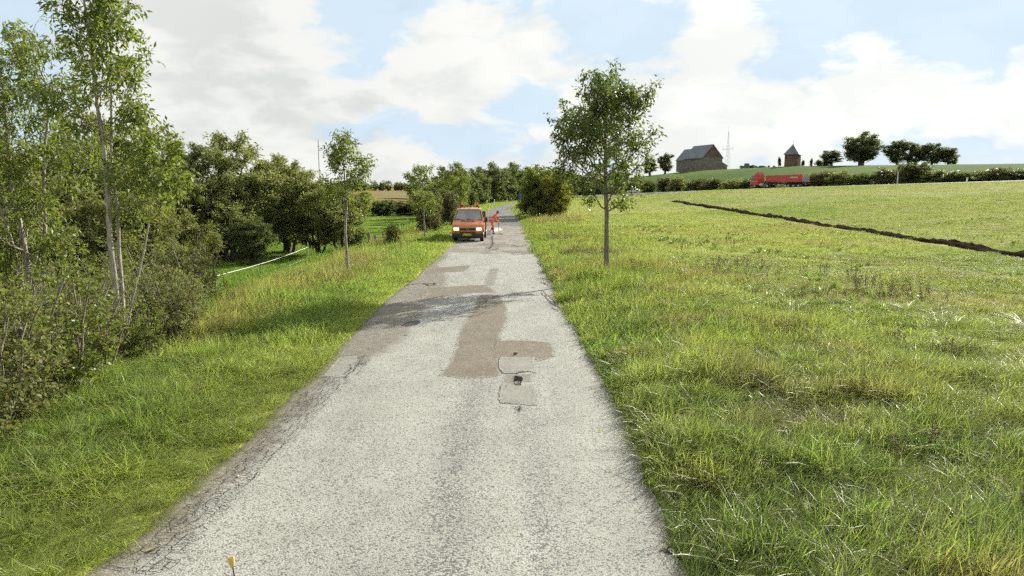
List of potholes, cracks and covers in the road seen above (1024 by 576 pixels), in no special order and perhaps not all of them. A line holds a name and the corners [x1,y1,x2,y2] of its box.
crack [117,353,372,572]
